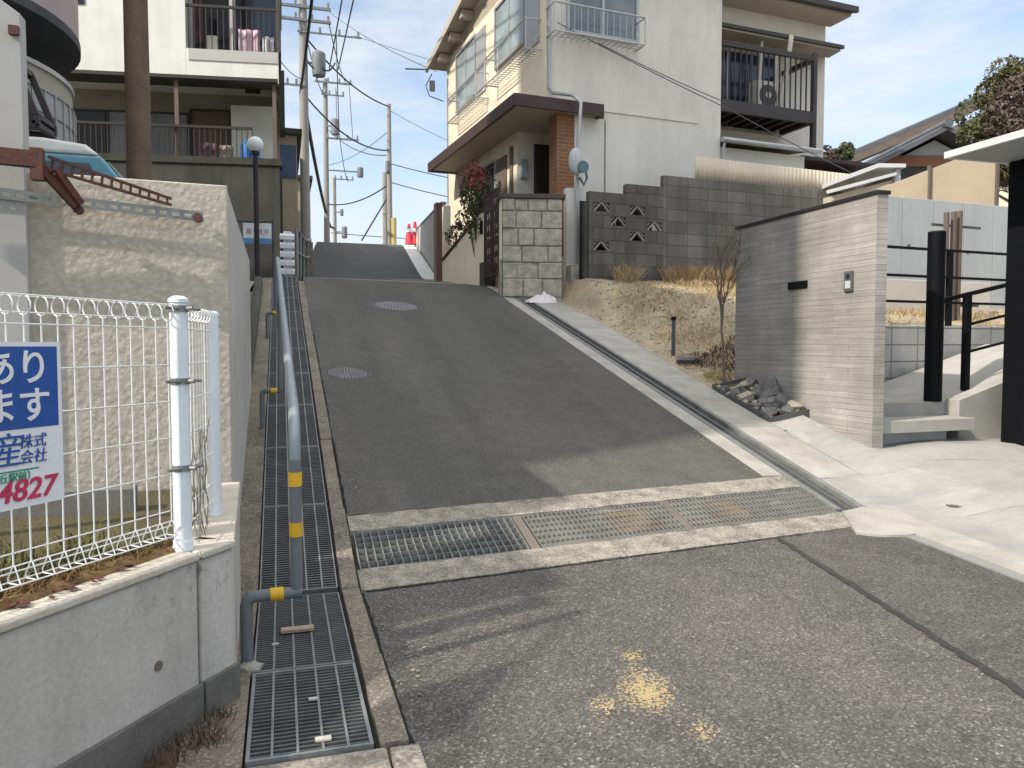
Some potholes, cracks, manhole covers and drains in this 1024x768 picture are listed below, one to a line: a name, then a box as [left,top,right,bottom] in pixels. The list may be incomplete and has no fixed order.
drain grate [666,488,837,529]
drain grate [522,502,689,548]
drain grate [272,286,299,298]
drain grate [253,592,355,673]
drain grate [263,446,327,507]
drain grate [270,328,306,348]
drain grate [245,662,374,768]
drain grate [260,504,338,595]
drain grate [272,276,297,286]
drain grate [271,298,301,312]
drain grate [271,312,303,328]
drain grate [266,405,319,448]
